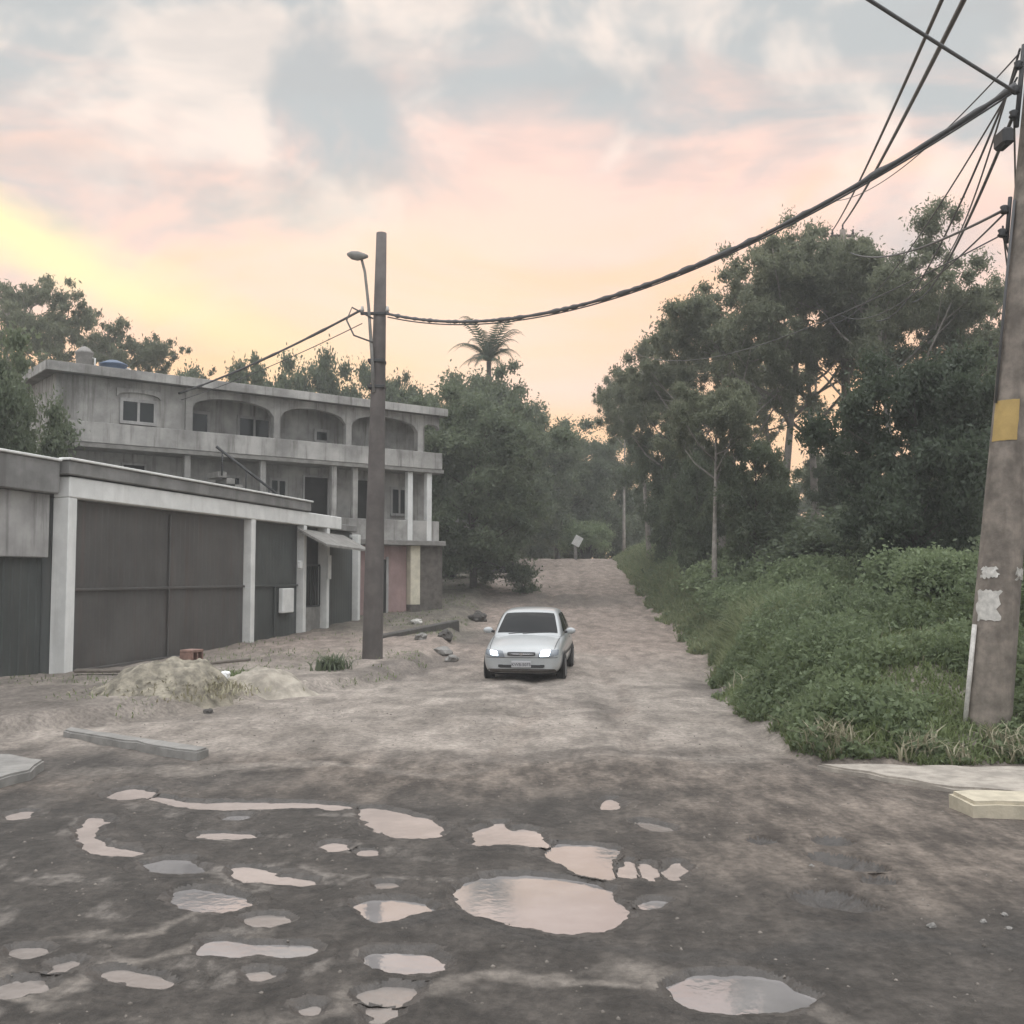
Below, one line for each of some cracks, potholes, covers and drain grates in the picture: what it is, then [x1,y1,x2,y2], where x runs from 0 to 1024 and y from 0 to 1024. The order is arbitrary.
pothole [524,837,643,883]
pothole [162,927,341,968]
pothole [335,938,477,982]
pothole [325,972,447,1009]
pothole [208,857,343,891]
pothole [640,958,849,1024]
pothole [122,850,223,878]
pothole [73,954,211,998]
pothole [635,854,673,887]
pothole [341,802,460,843]
pothole [452,816,564,852]
